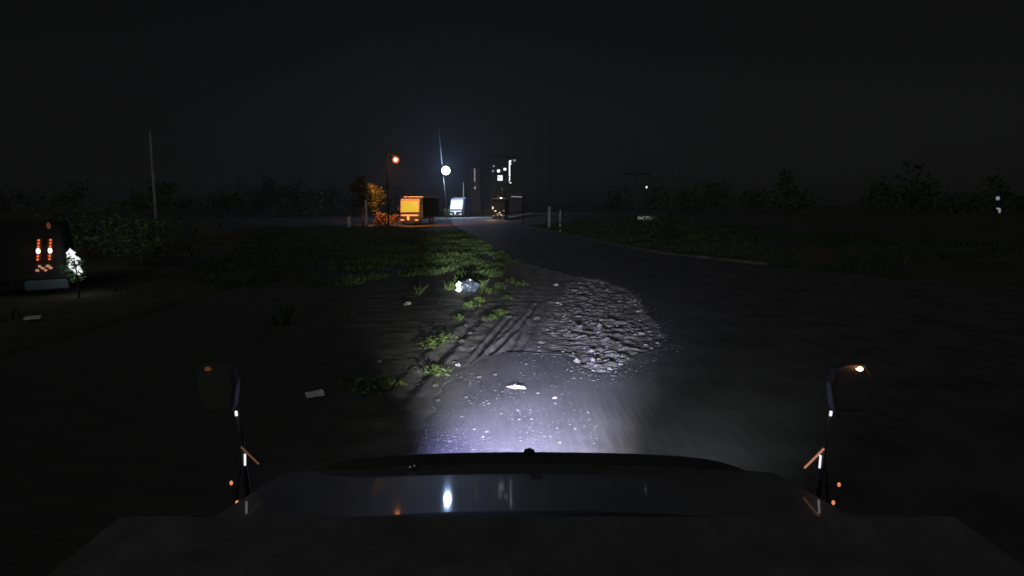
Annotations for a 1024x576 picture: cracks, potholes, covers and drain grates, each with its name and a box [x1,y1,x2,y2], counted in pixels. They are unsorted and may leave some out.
pothole [523,278,670,376]
